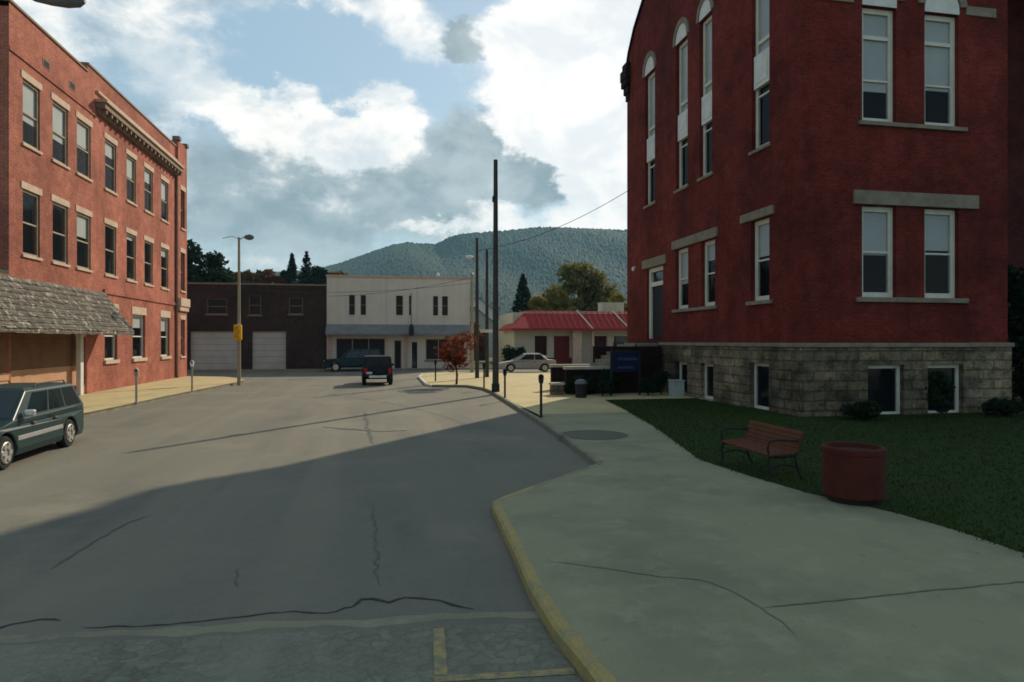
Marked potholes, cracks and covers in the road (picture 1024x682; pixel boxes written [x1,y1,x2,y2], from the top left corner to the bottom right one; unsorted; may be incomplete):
crack [83,507,473,628]
manhole cover [559,430,629,440]
crack [52,516,147,568]
crack [546,560,1024,632]
crack [0,618,59,628]
crack [329,412,402,444]
